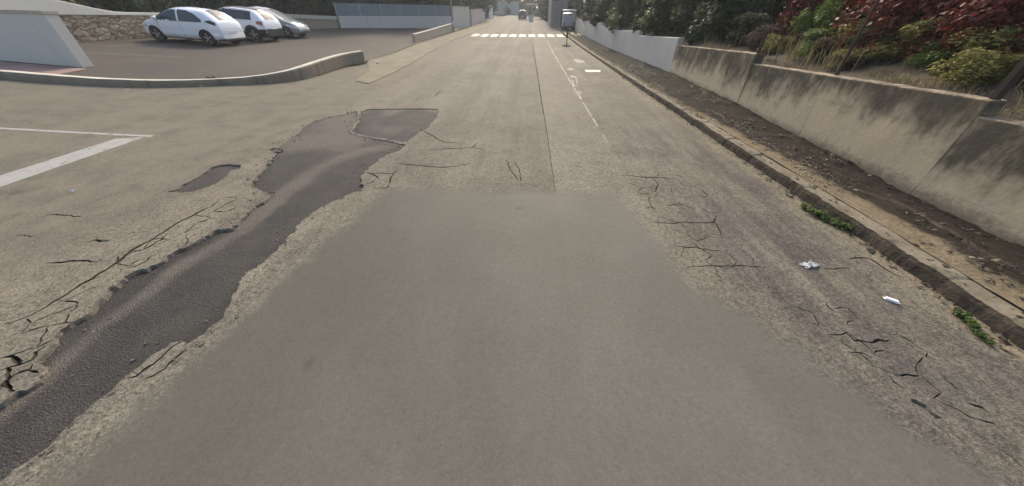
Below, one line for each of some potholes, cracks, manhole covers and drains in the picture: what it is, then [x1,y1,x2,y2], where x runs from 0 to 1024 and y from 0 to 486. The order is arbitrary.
crack [794,303,1023,467]
crack [0,197,237,392]
crack [621,172,767,278]
crack [826,257,900,277]
crack [367,130,483,188]
